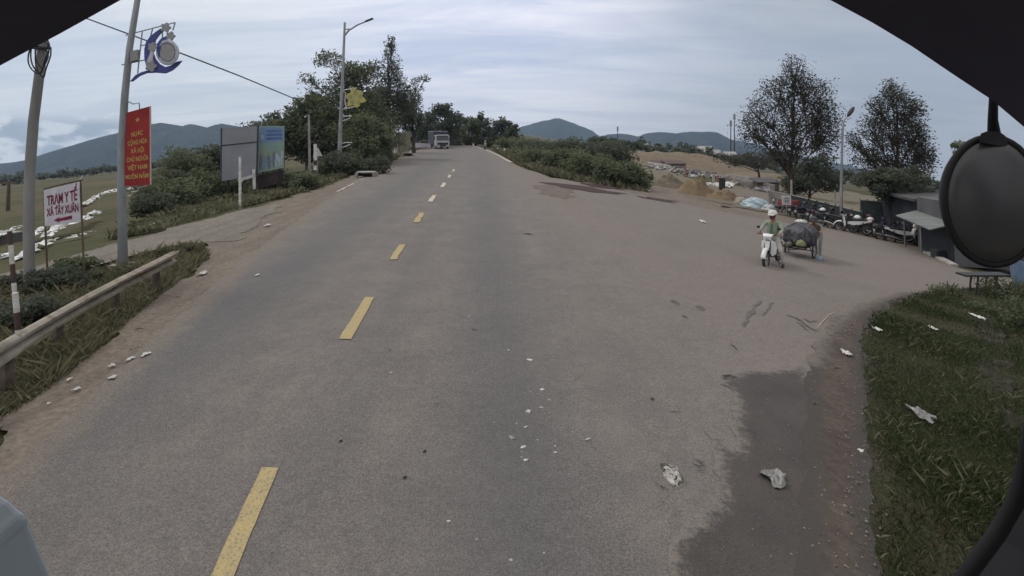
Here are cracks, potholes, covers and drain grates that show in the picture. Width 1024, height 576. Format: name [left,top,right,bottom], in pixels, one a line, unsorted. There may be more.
crack [789,312,835,331]
